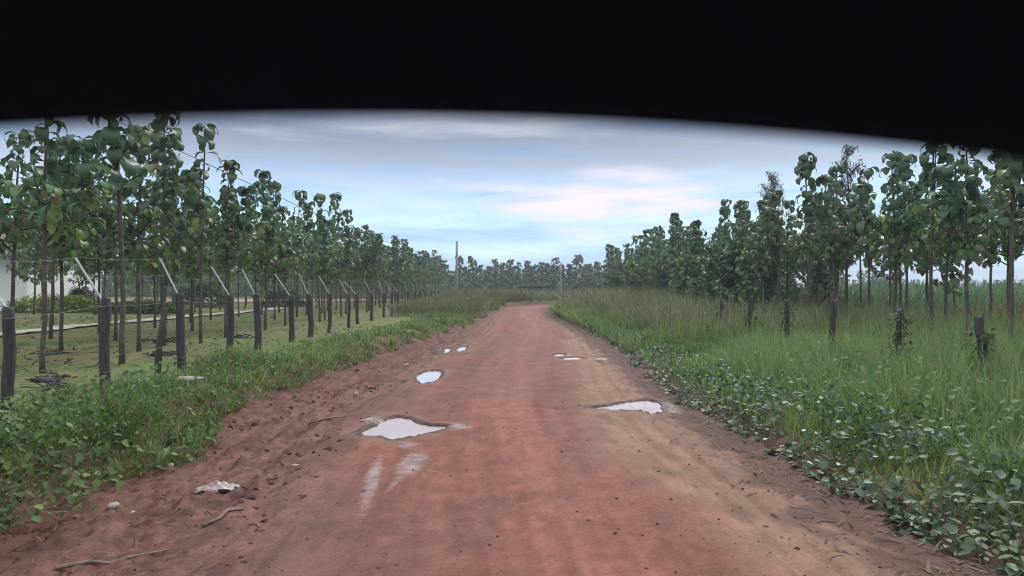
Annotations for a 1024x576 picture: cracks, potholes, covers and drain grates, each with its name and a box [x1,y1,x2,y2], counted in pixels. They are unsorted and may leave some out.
pothole [350,414,454,441]
pothole [411,369,447,384]
pothole [583,398,670,414]
